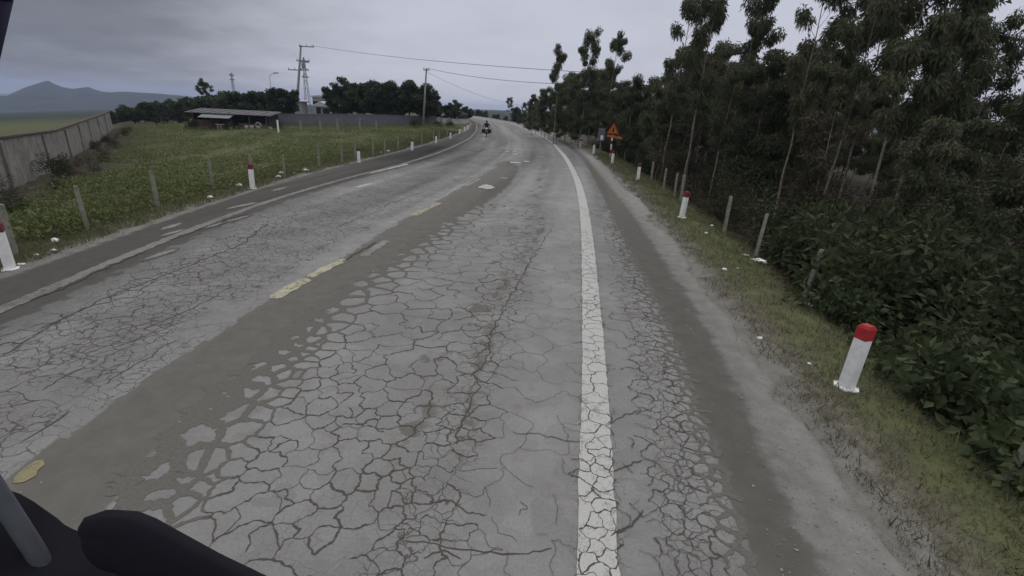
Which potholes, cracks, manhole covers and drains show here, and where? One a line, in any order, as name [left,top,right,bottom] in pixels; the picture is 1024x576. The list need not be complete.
crack [0,191,764,576]
